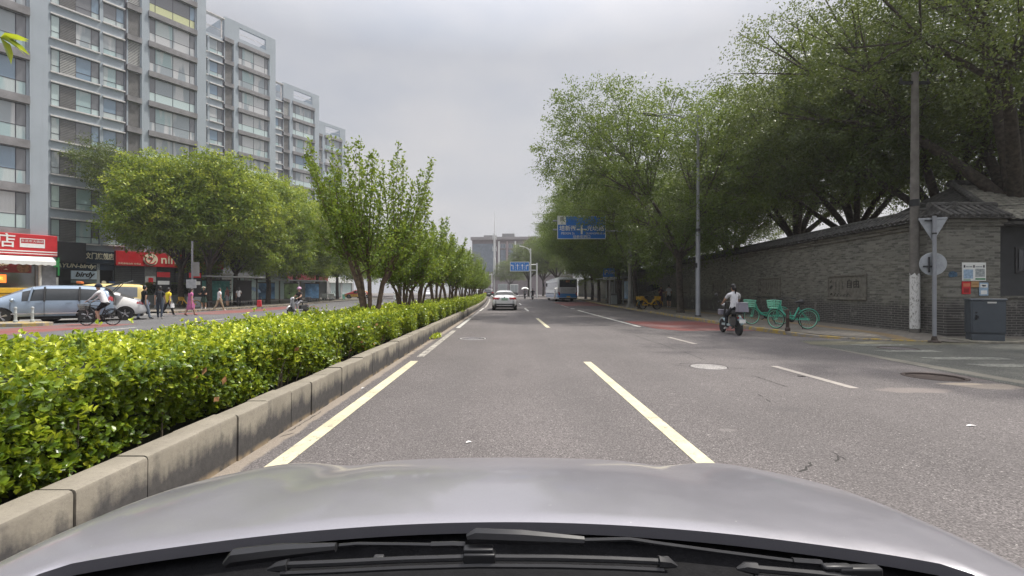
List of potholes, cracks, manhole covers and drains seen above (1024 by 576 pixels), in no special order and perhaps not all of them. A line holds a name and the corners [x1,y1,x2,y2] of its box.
manhole cover [901,372,970,382]
